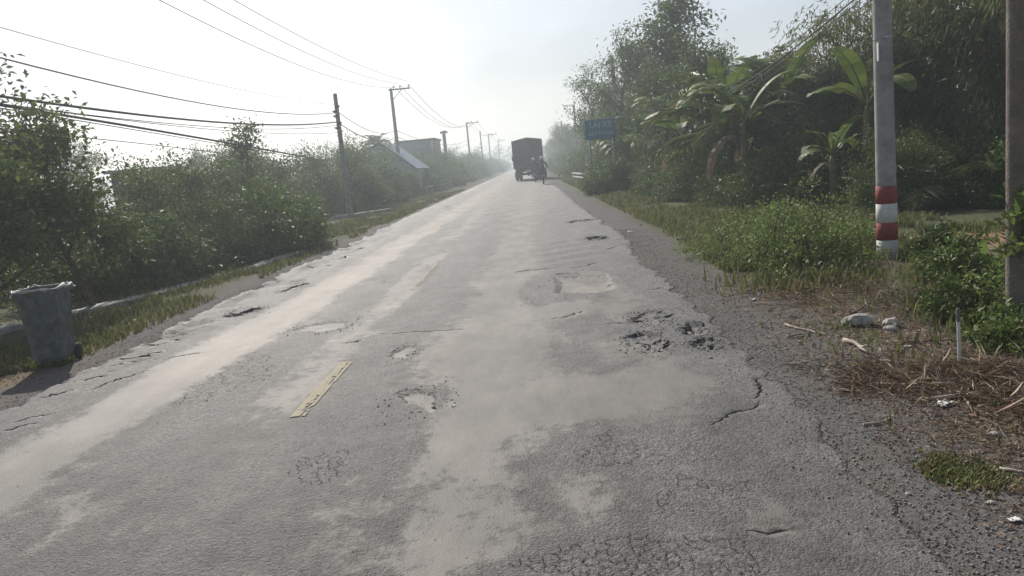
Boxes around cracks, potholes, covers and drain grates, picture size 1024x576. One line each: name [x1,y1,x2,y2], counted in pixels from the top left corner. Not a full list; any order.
pothole [387,346,415,358]
crack [507,532,760,576]
pothole [393,389,437,414]
pothole [624,331,672,353]
pothole [631,310,673,324]
pothole [292,321,350,332]
crack [712,378,764,425]
crack [42,339,197,398]
pothole [692,337,719,351]
pothole [682,321,710,336]
